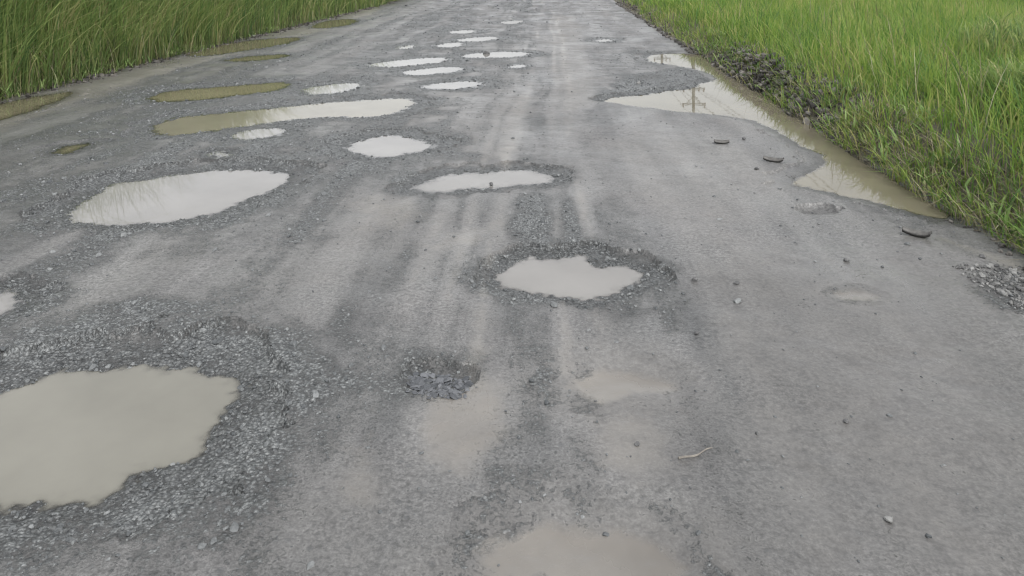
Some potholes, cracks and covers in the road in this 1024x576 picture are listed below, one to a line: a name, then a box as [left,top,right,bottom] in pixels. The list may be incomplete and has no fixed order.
pothole [349,54,462,70]
pothole [124,92,438,140]
pothole [386,160,575,199]
